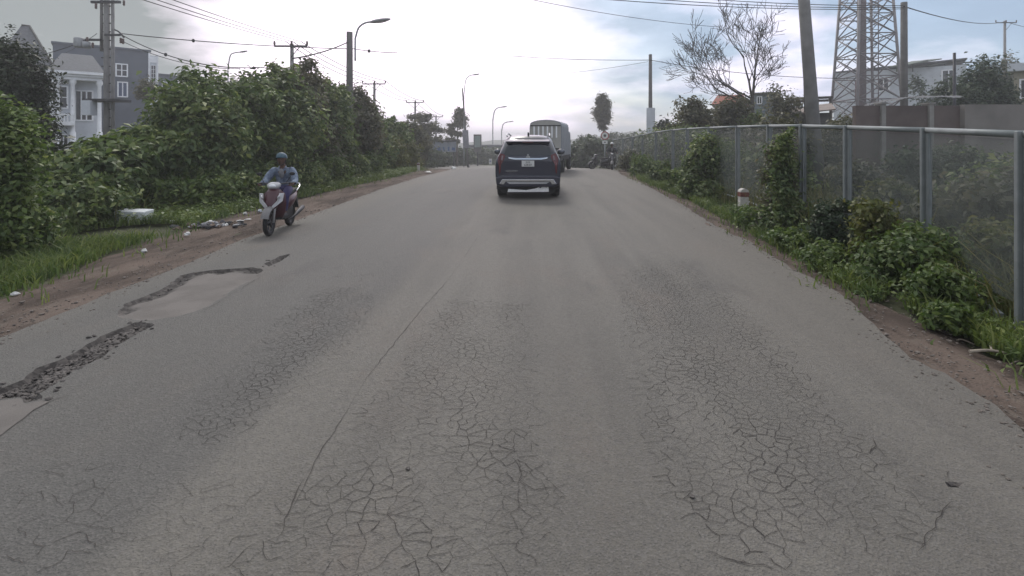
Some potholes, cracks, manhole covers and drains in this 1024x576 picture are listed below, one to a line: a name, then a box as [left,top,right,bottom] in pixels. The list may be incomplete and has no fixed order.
crack [177,281,374,444]
crack [224,299,568,576]
pothole [0,322,154,403]
crack [620,260,963,574]
crack [6,462,263,576]
